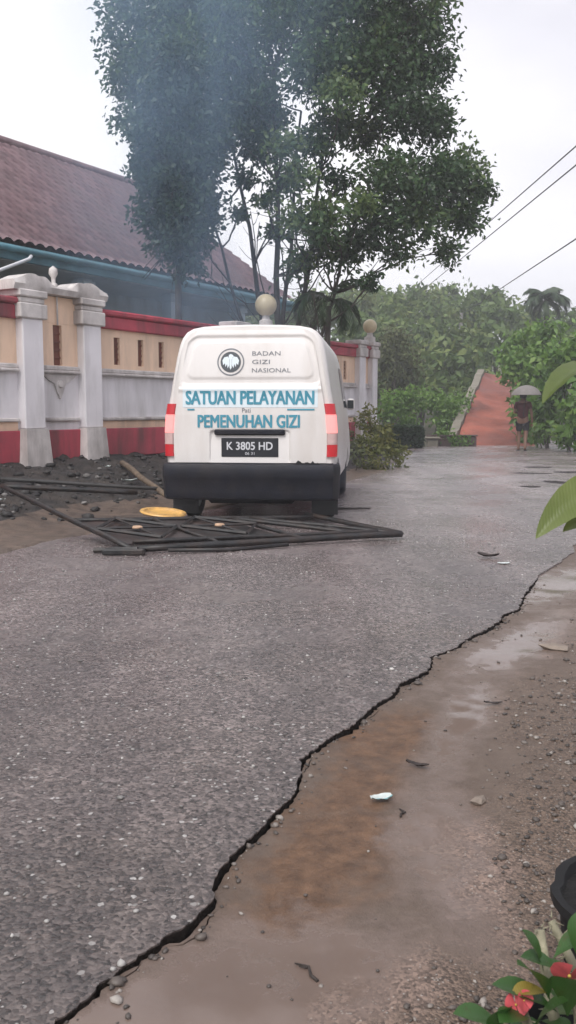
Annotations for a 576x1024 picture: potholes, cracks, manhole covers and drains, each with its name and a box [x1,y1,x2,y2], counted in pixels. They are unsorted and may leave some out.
crack [55,579,538,1024]
